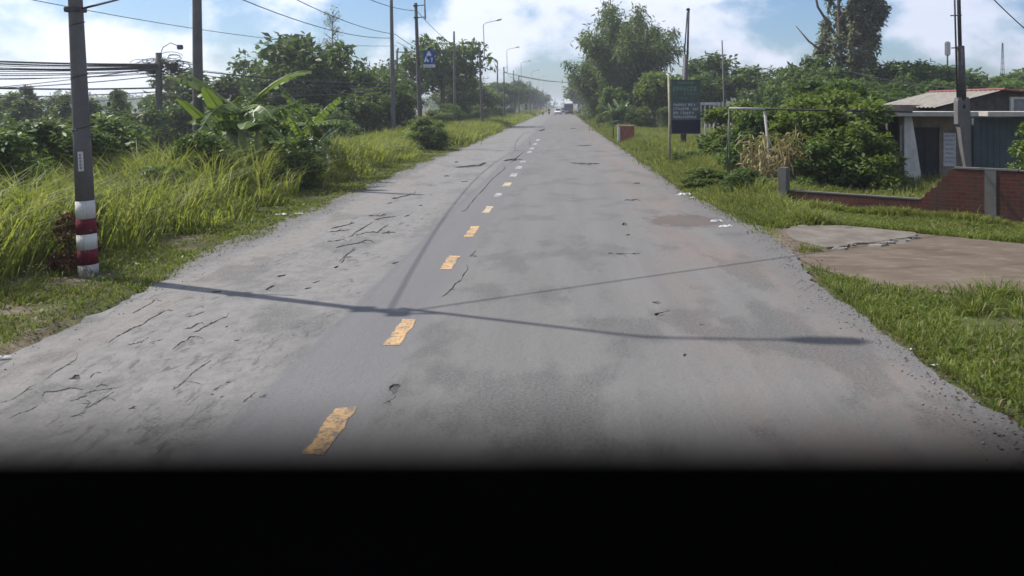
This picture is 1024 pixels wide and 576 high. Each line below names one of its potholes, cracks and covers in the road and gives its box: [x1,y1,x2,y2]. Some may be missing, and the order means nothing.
crack [442,252,478,297]
crack [327,194,413,263]
crack [109,300,240,350]
crack [174,361,265,402]
crack [48,355,135,417]
